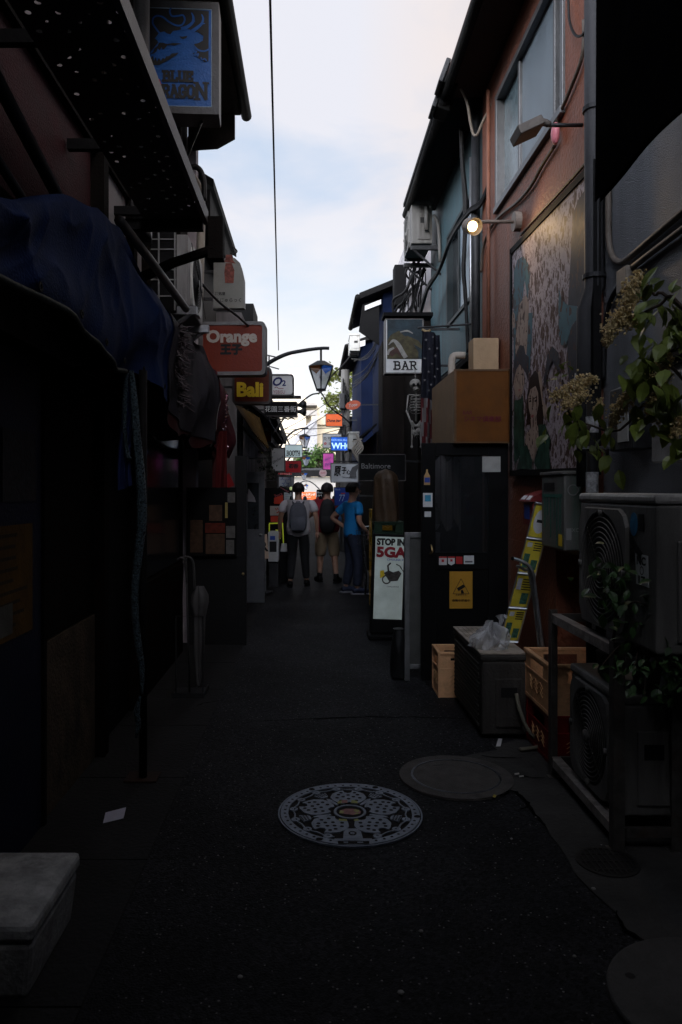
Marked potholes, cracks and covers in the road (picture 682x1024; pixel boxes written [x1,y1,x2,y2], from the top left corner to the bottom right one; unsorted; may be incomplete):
manhole cover [399,755,514,801]
manhole cover [606,937,682,1024]
drain grate [575,846,641,878]
manhole cover [278,783,423,849]
